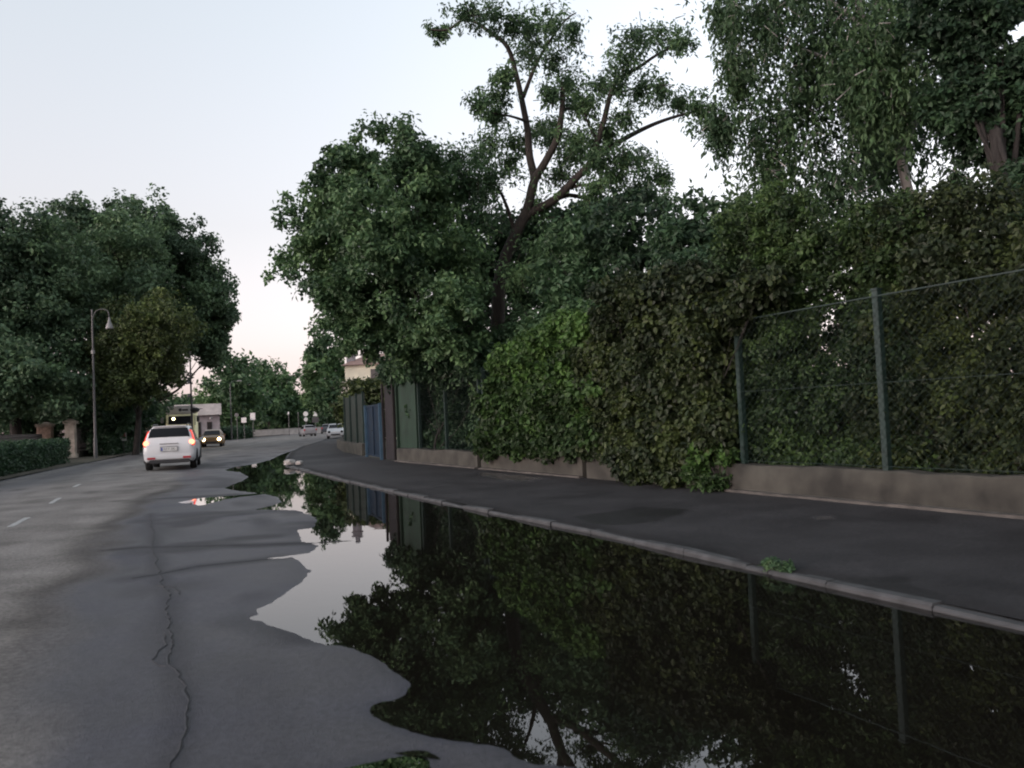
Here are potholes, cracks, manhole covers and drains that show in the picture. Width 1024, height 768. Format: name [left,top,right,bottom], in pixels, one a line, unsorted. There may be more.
crack [101,514,368,768]
